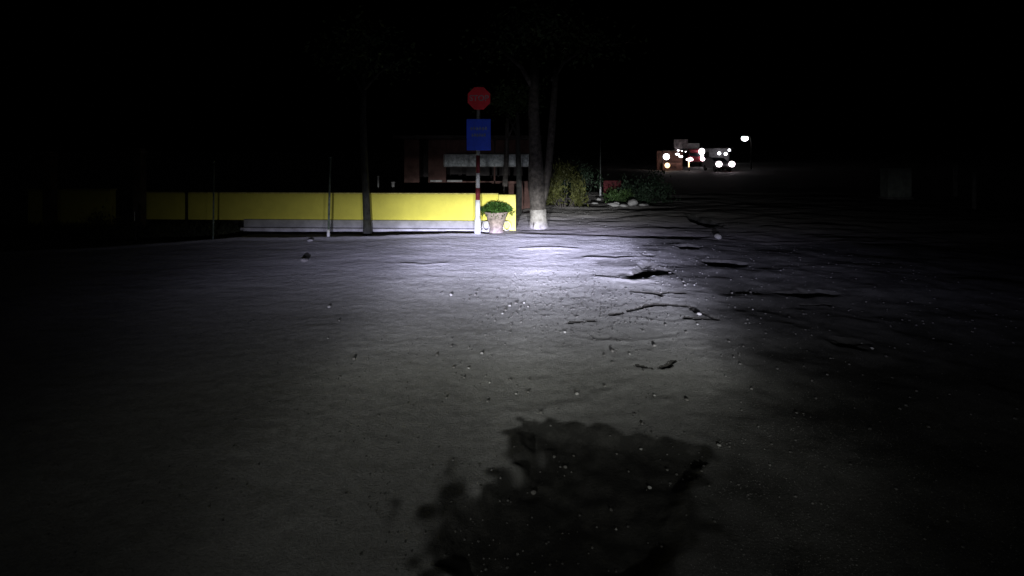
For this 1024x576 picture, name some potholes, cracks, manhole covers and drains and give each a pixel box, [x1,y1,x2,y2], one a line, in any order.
pothole [624,260,678,279]
crack [567,291,720,324]
